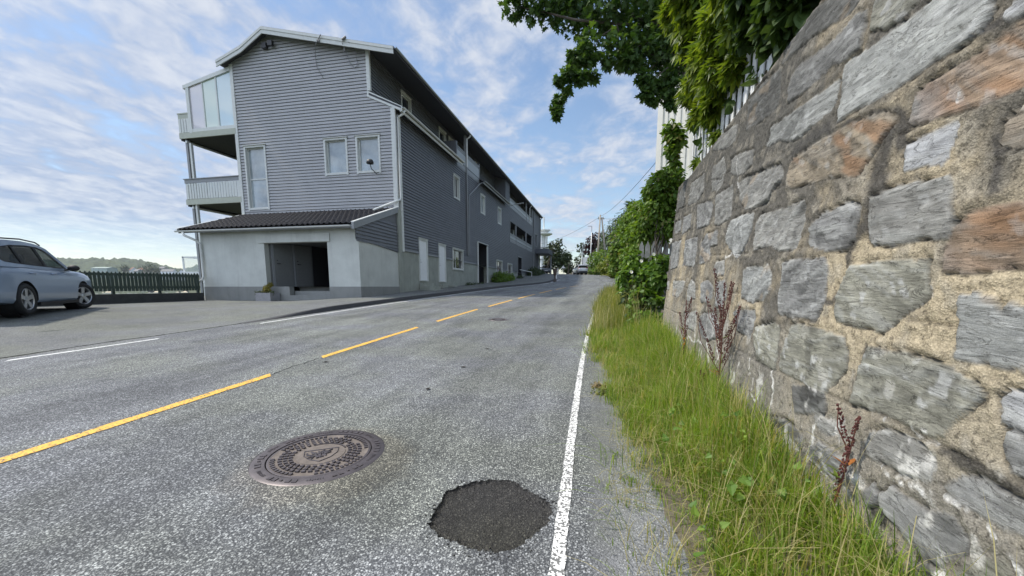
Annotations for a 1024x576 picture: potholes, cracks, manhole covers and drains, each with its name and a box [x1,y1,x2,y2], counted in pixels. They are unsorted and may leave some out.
pothole [413,477,558,560]
manhole cover [248,430,385,486]
